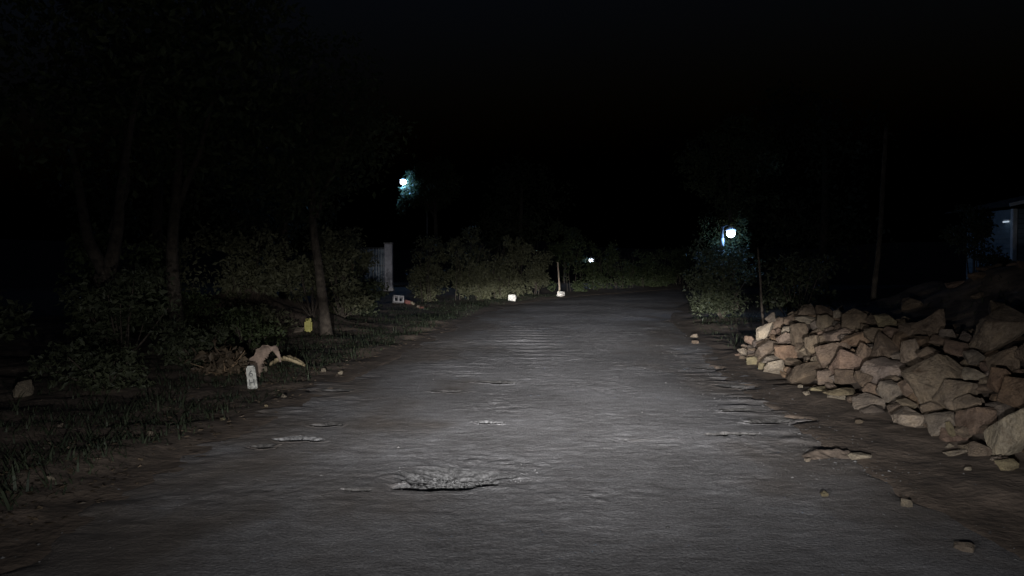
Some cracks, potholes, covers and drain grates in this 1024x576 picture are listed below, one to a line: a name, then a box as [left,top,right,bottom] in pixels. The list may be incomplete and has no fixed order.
pothole [737,417,812,425]
pothole [263,435,332,443]
pothole [371,459,553,496]
